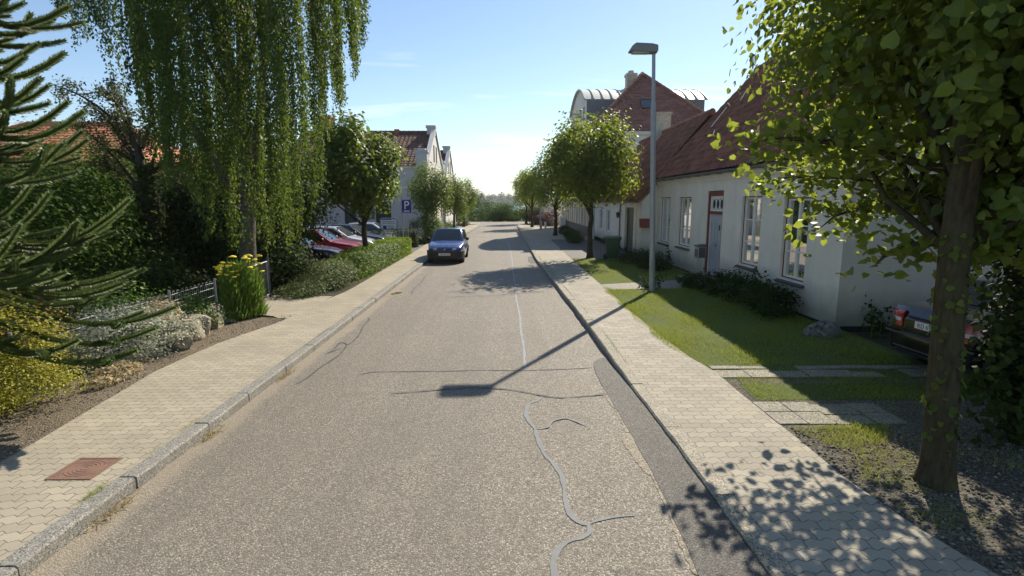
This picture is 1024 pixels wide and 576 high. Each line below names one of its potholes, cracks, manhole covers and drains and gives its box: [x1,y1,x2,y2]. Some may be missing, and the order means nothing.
manhole cover [44,456,123,481]
